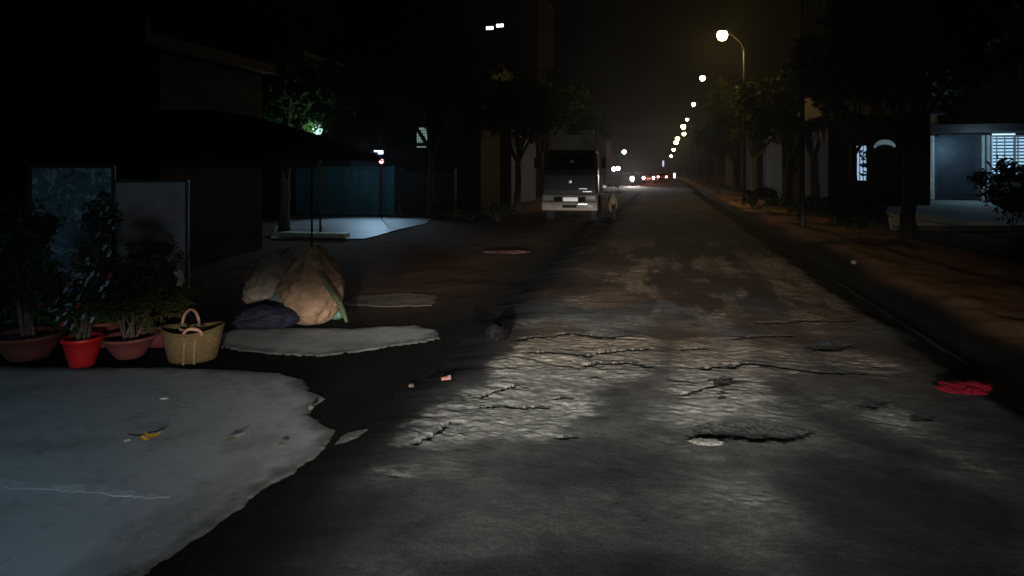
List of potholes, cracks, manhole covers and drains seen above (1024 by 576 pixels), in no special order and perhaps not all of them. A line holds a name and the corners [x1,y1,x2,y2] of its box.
pothole [686,421,817,445]
crack [681,347,865,396]
pothole [802,340,860,352]
crack [733,319,858,340]
pothole [899,413,935,422]
crack [478,384,574,409]
crack [517,332,654,368]
crack [417,422,453,445]
pothole [854,398,890,409]
